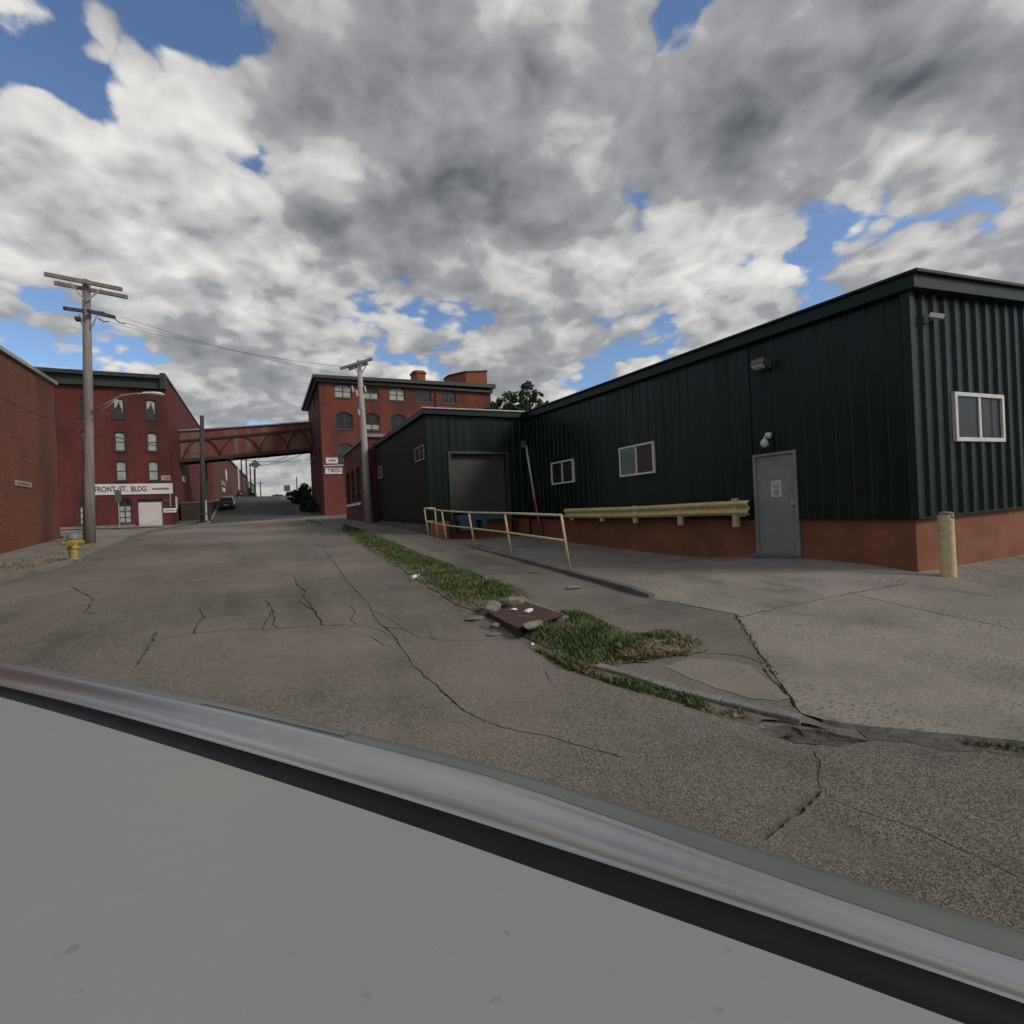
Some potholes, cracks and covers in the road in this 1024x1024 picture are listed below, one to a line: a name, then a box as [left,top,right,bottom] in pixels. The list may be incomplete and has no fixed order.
crack [70,586,95,614]
pothole [762,725,869,747]
crack [134,543,620,757]
crack [764,750,1023,879]
